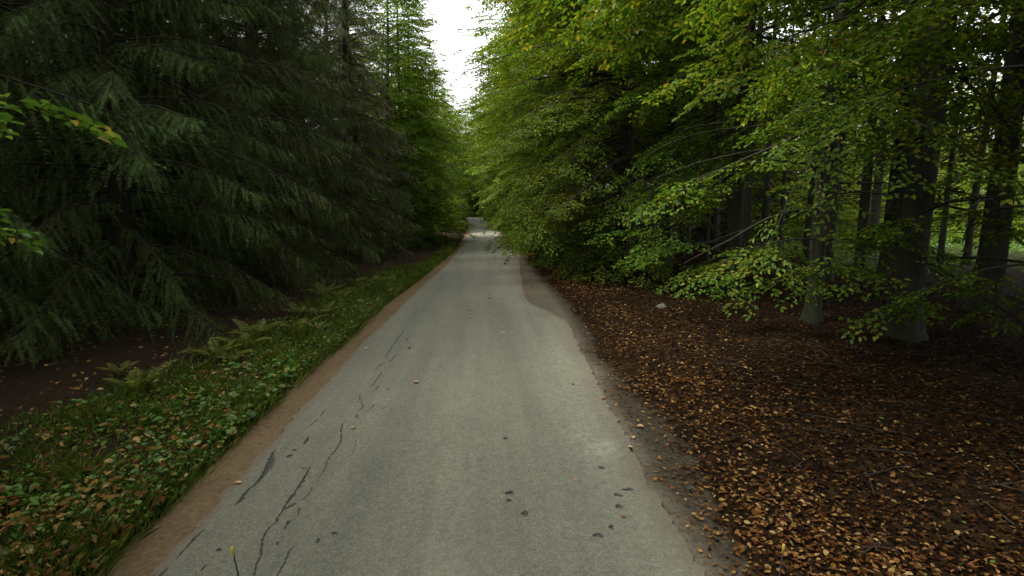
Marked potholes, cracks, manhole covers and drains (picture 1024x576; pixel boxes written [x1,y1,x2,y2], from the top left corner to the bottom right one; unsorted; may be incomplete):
crack [234,308,418,576]
crack [159,529,206,576]
